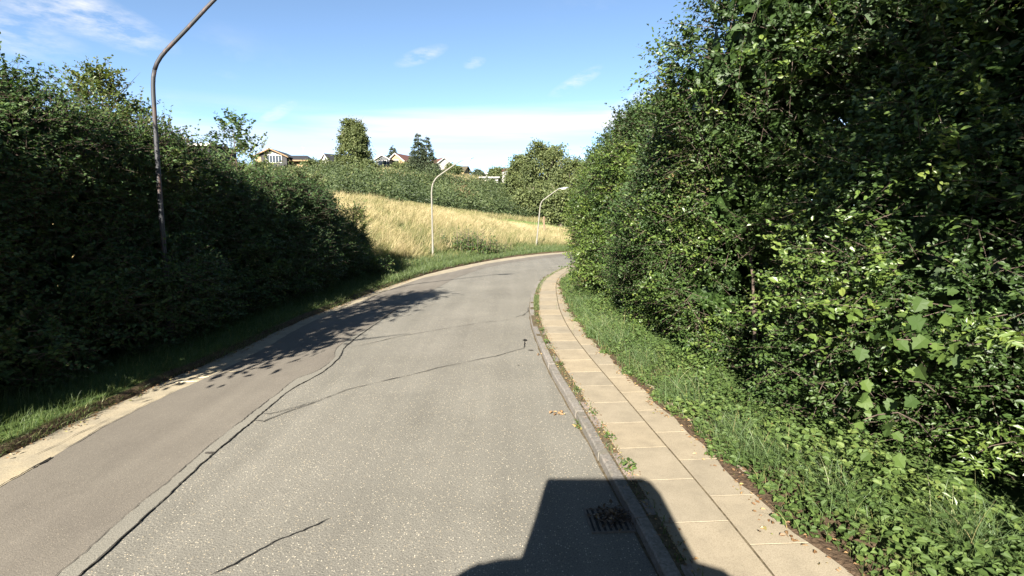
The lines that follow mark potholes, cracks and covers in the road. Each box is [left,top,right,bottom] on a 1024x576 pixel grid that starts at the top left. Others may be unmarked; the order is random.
crack [57,310,525,576]
drain grate [583,507,636,534]
